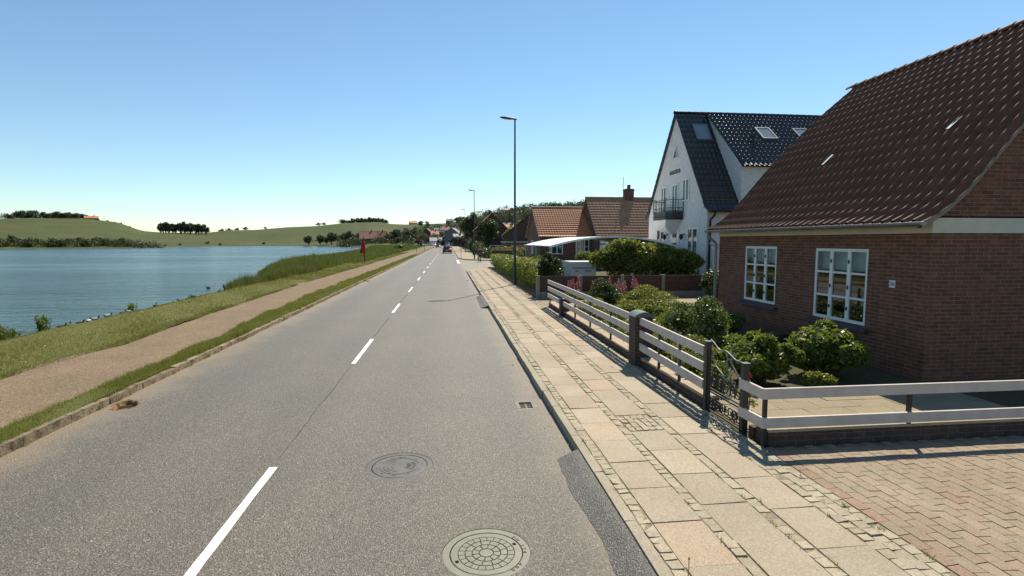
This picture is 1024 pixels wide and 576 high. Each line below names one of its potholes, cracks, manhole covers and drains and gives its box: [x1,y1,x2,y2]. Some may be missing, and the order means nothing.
manhole cover [366,453,433,480]
pothole [108,399,140,410]
manhole cover [442,529,531,576]
drain grate [514,401,539,410]
